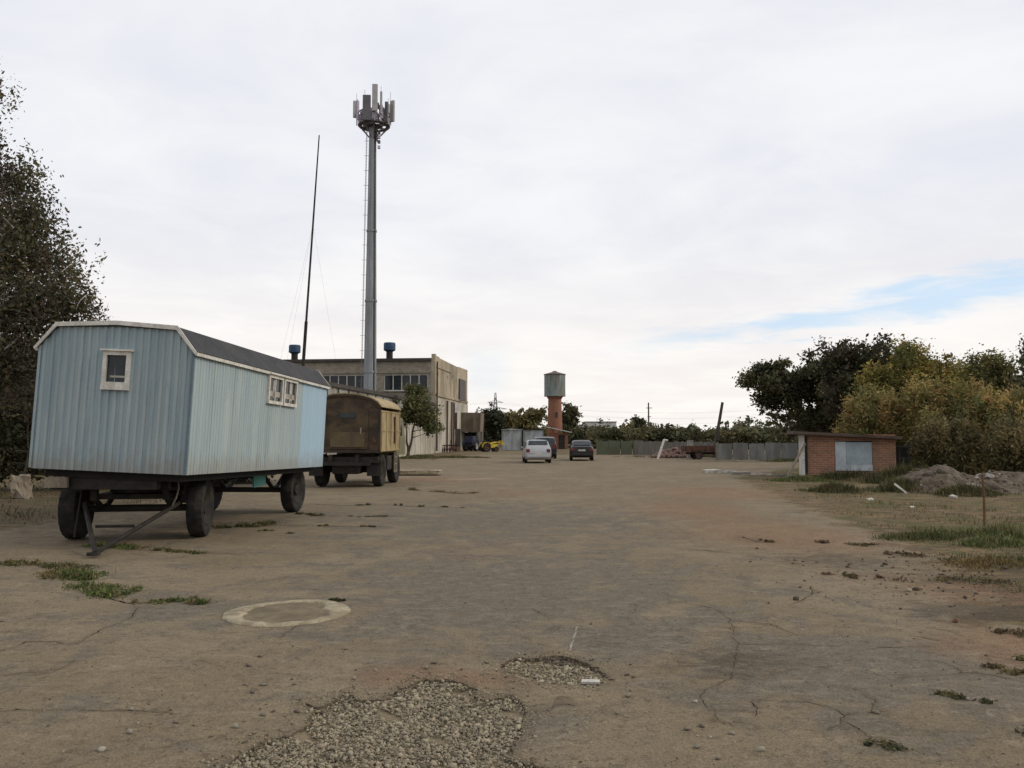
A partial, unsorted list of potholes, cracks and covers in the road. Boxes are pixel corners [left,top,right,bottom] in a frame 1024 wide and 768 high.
pothole [180,669,588,768]
crack [780,688,884,749]
crack [0,564,181,673]
crack [671,601,825,725]
pothole [475,650,633,696]
manhole cover [222,599,351,627]
